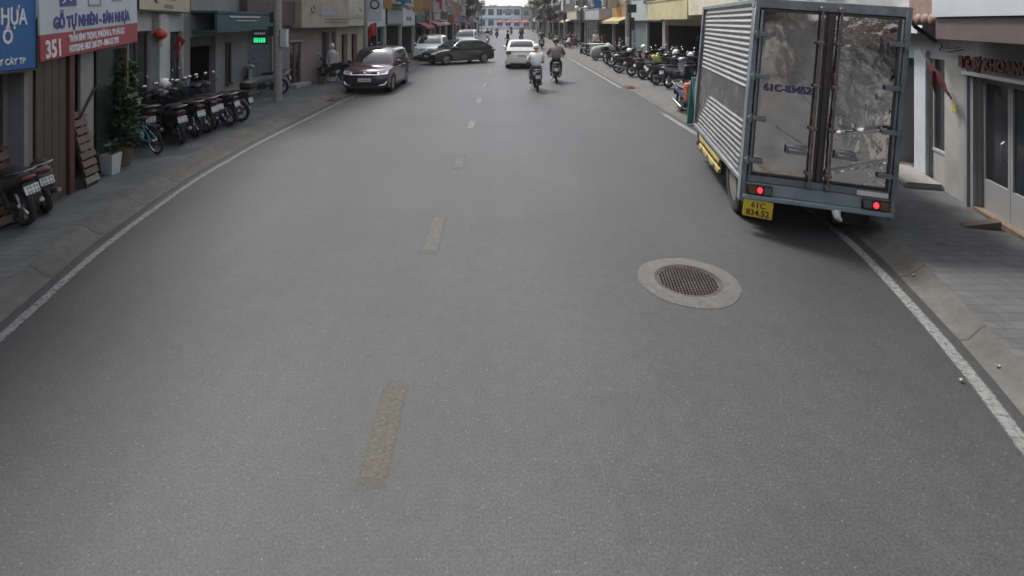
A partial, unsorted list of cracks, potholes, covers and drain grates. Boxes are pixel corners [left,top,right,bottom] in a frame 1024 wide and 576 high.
manhole cover [638,258,742,309]
